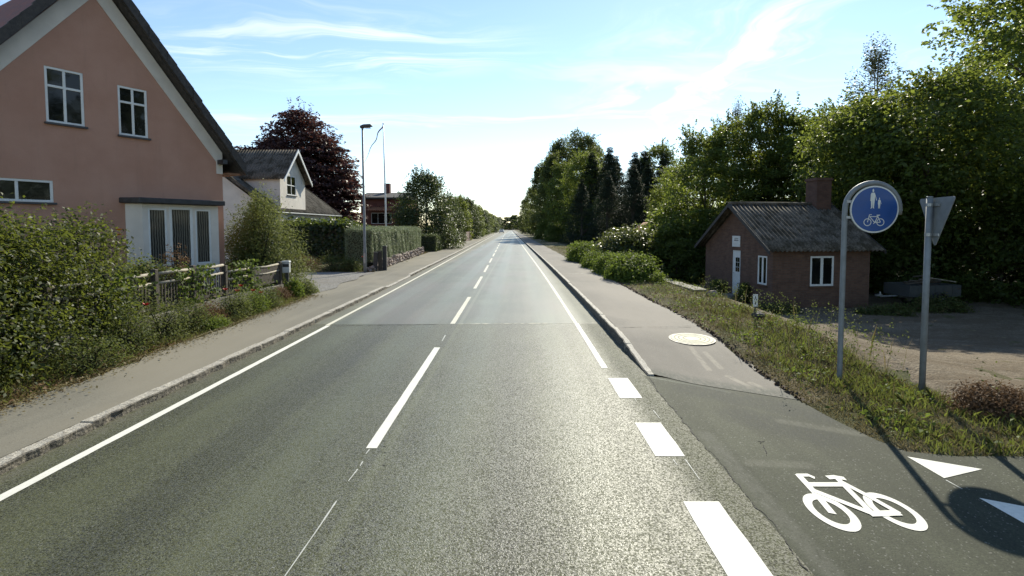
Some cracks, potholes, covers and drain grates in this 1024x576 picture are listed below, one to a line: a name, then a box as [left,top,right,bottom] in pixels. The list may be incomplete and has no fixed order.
manhole cover [669,333,716,346]
